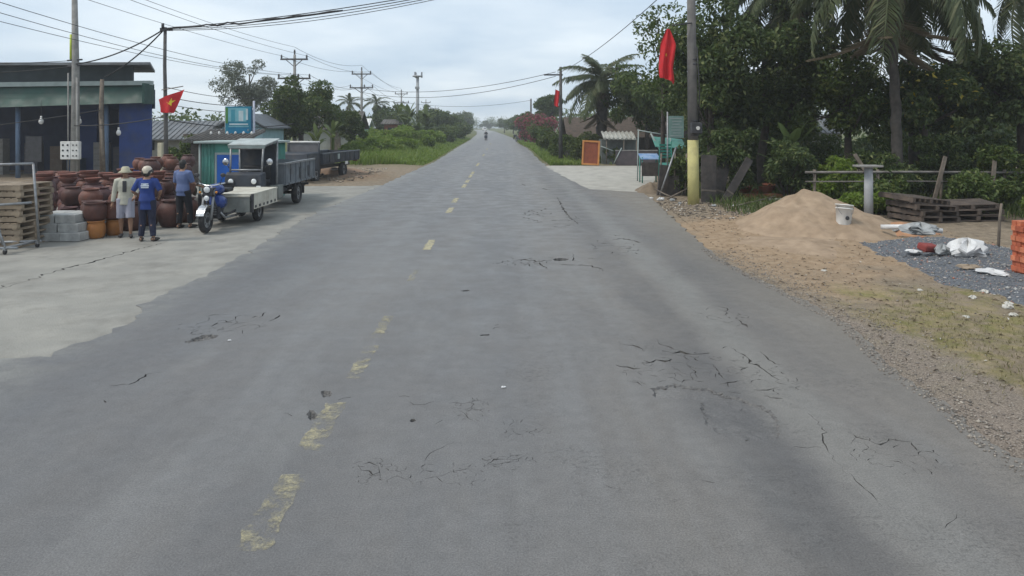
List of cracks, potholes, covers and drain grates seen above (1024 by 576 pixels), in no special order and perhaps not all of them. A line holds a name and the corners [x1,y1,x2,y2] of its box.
crack [494,235,640,271]
crack [177,313,280,335]
crack [343,444,534,485]
crack [0,244,157,289]
crack [523,188,578,226]
crack [848,432,938,474]
crack [617,344,800,399]
crack [399,396,547,436]
